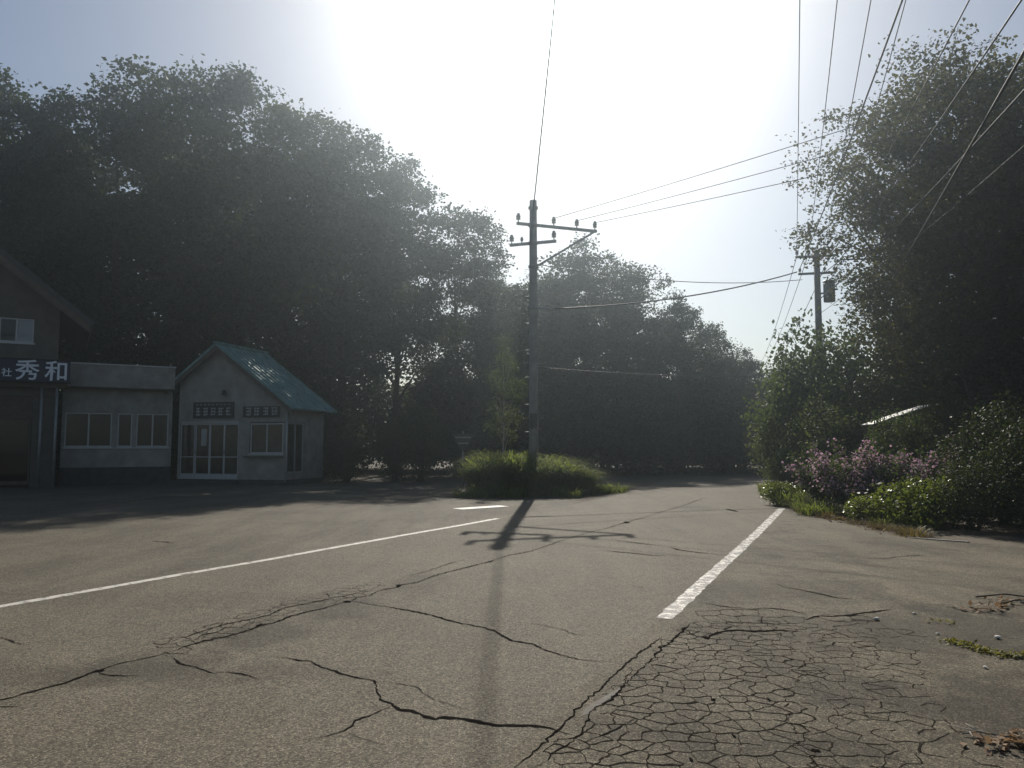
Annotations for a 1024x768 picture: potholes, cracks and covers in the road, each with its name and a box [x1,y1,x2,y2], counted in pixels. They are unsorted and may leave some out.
crack [0,498,1002,768]
